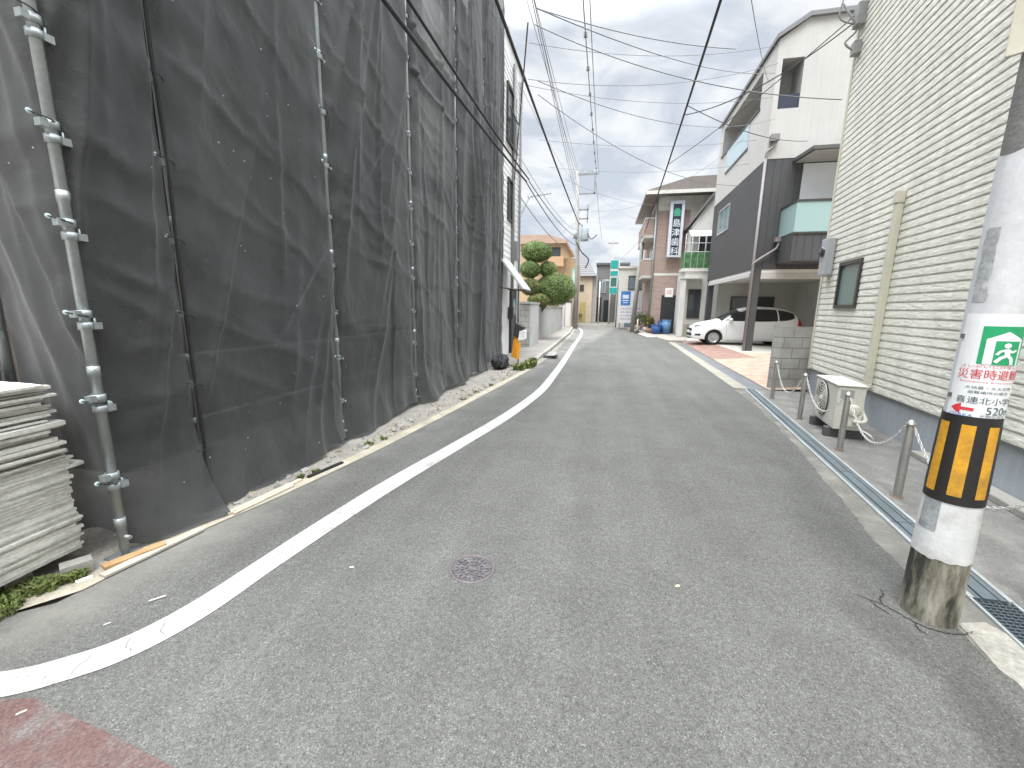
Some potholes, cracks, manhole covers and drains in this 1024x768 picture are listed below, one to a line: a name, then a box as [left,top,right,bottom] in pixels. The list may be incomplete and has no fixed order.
manhole cover [449,554,495,584]
crack [856,589,974,635]
